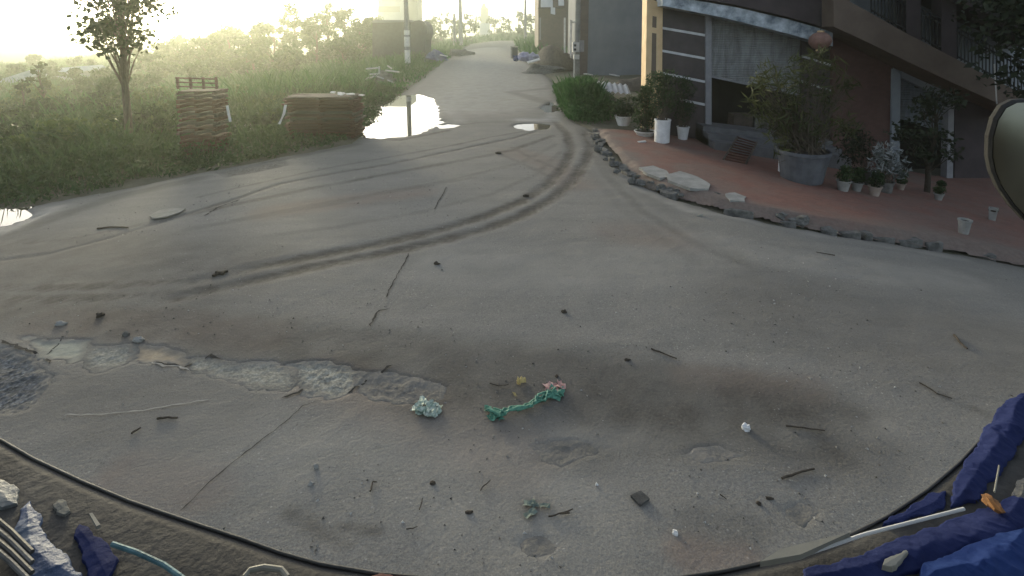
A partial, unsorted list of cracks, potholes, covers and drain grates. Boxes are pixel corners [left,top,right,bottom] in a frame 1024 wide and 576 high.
pothole [352,370,447,405]
pothole [0,347,54,414]
pothole [532,440,599,467]
pothole [678,446,743,463]
pothole [286,360,363,401]
pothole [82,342,140,374]
crack [181,400,318,510]
crack [66,399,209,415]
pothole [188,357,300,392]
crack [369,254,409,326]
pothole [520,536,557,557]
pothole [20,335,94,364]
